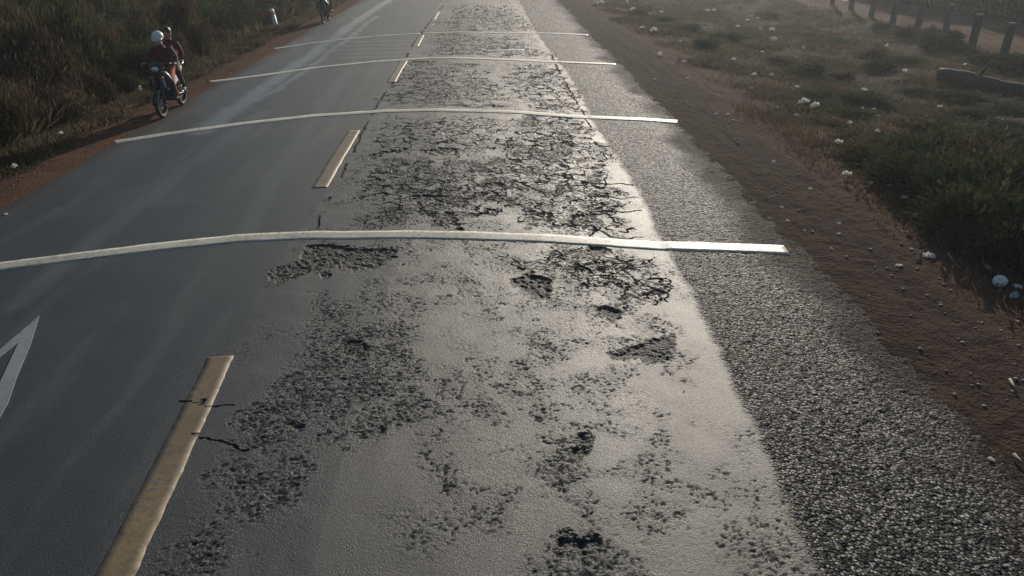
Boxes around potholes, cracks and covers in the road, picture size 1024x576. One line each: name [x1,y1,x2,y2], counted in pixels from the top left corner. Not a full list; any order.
pothole [564,431,596,462]
crack [316,5,675,309]
pothole [250,402,285,417]
pothole [278,419,306,432]
pothole [334,337,374,360]
pothole [606,333,678,365]
pothole [265,243,399,287]
